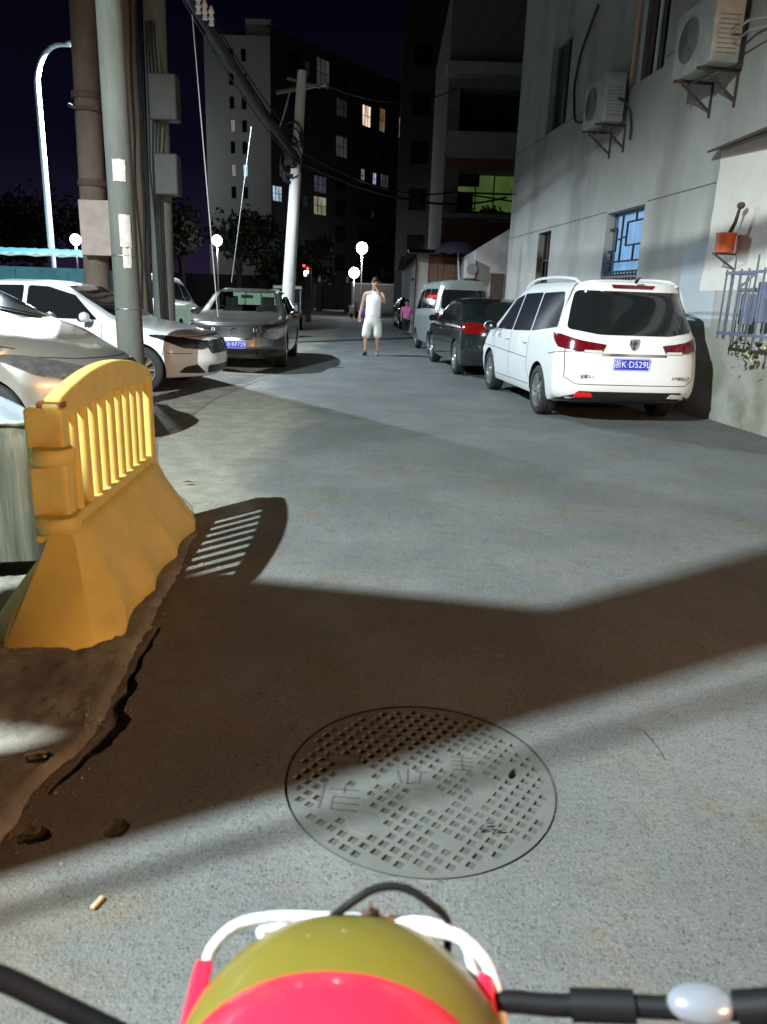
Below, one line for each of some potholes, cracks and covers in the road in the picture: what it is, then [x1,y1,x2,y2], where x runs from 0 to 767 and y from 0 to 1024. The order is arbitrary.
crack [630,728,666,760]
crack [47,627,161,795]
pothole [101,818,131,838]
manhole cover [284,707,558,880]
pothole [11,825,52,845]
